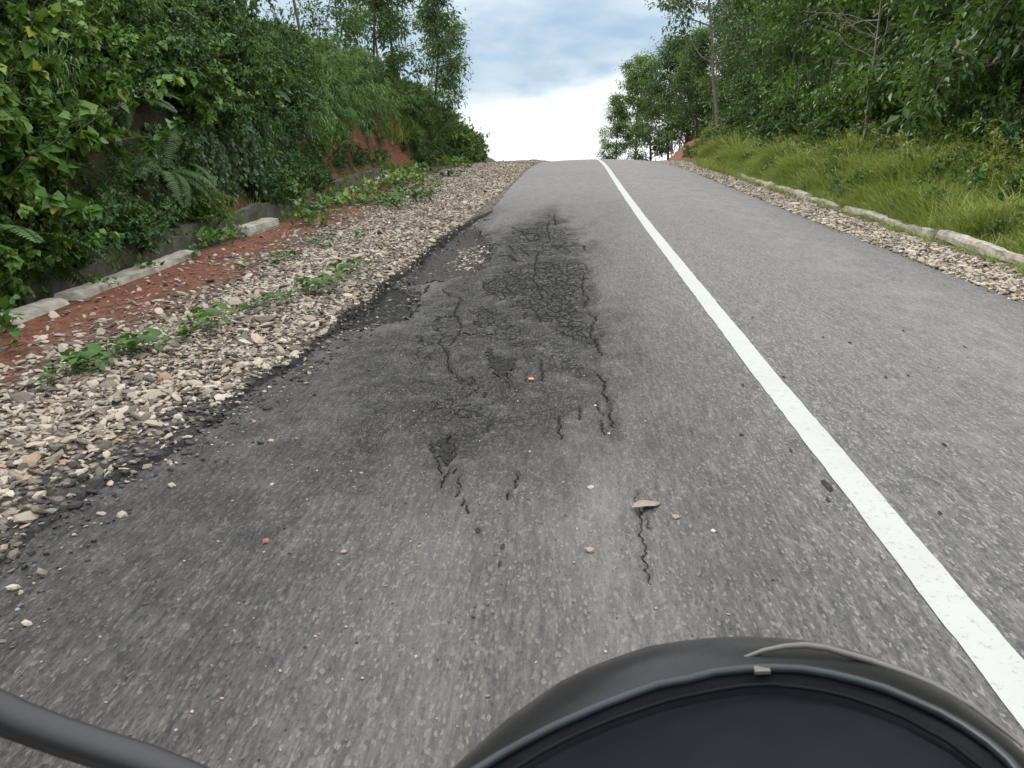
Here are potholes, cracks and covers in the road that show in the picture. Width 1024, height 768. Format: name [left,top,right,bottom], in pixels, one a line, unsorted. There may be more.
crack [634,493,650,585]
crack [405,214,614,514]
